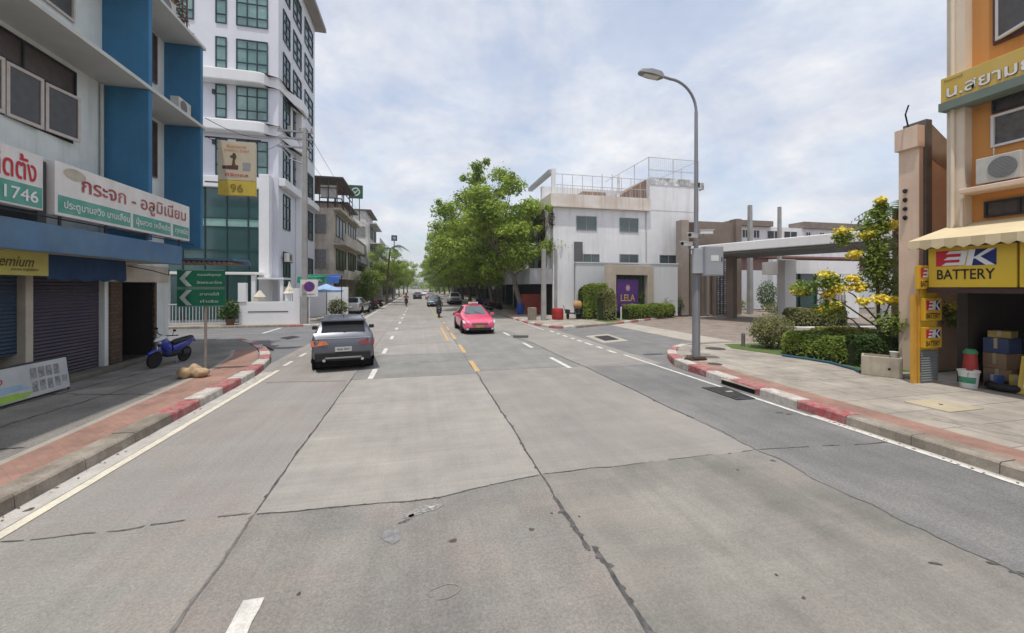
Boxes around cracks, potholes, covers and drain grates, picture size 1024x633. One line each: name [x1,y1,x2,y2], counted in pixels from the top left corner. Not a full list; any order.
drain grate [721,378,756,393]
crack [0,420,1024,577]
manhole cover [904,398,984,413]
drain grate [702,387,755,400]
